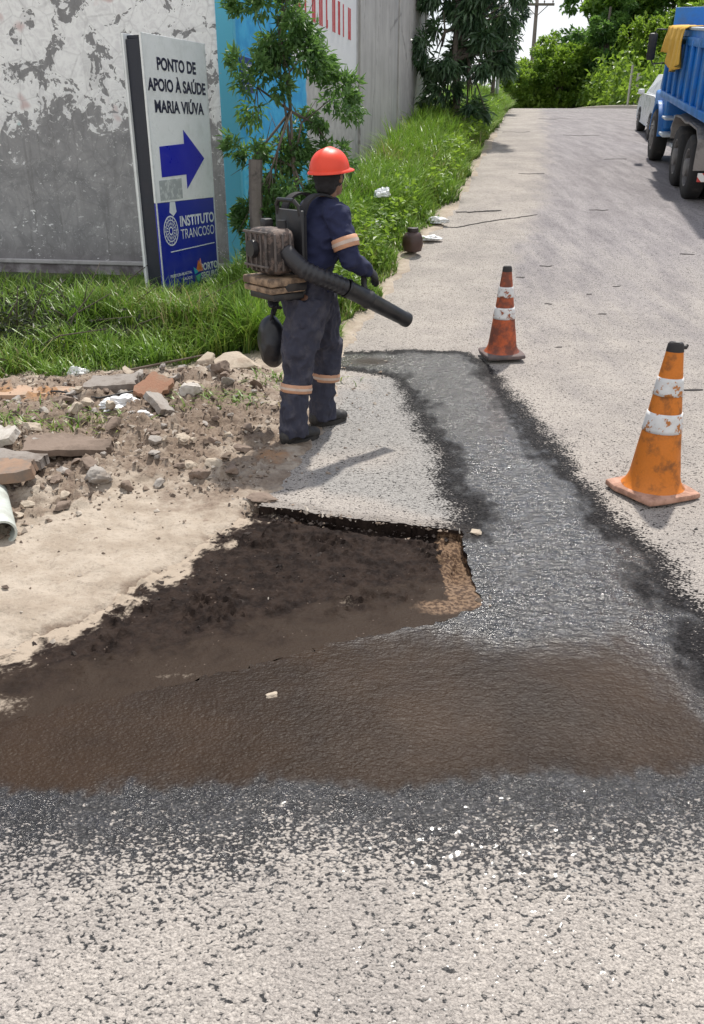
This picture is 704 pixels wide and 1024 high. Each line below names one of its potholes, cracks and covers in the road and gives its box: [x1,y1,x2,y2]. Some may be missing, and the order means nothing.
crack [448,210,537,228]
pothole [0,506,482,722]
